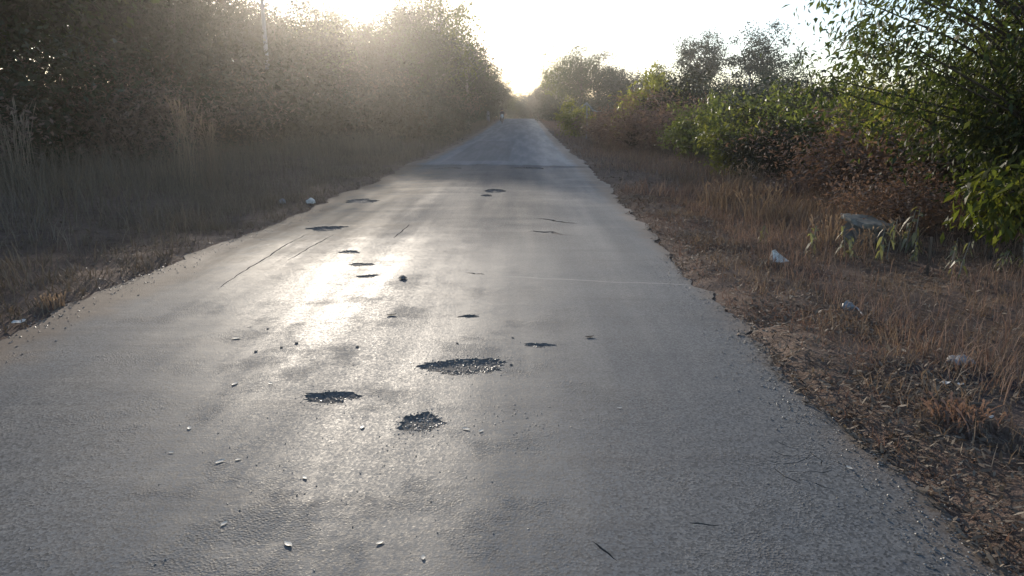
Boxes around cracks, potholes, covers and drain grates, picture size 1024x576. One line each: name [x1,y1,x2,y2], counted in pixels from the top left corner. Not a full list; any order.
pothole [390,409,453,434]
pothole [401,354,520,380]
crack [534,218,568,235]
pothole [294,390,363,405]
crack [218,234,333,289]
